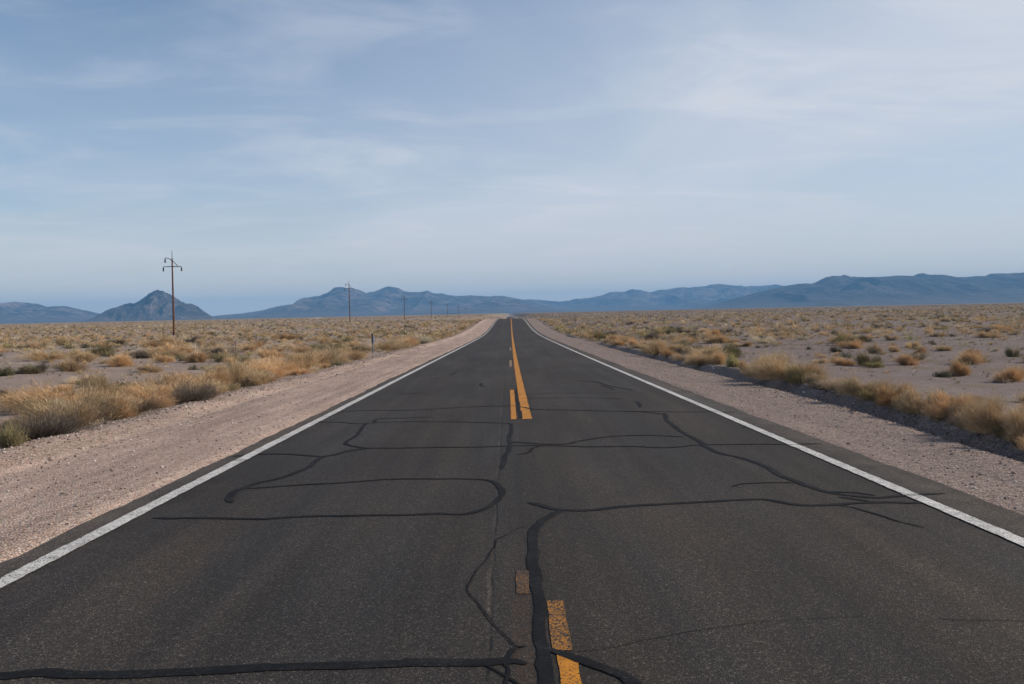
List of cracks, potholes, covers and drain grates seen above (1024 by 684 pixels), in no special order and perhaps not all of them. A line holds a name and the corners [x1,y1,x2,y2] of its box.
crack [576,616,857,652]
